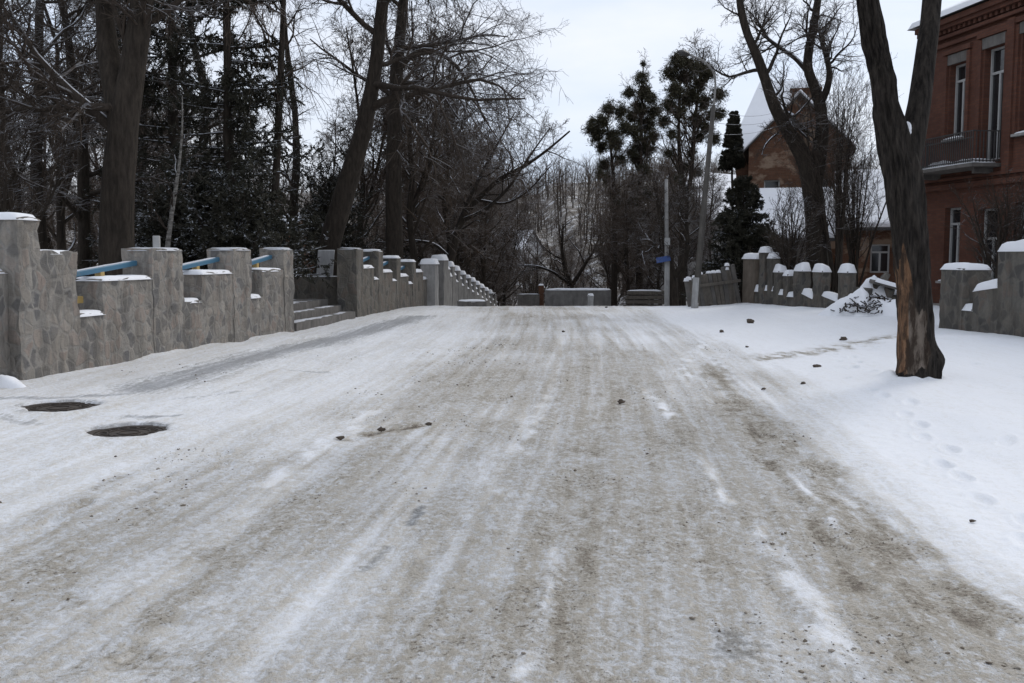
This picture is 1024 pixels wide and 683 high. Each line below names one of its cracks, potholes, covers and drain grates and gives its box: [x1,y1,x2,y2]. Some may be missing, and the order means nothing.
manhole cover [22,402,100,412]
manhole cover [86,425,167,437]
